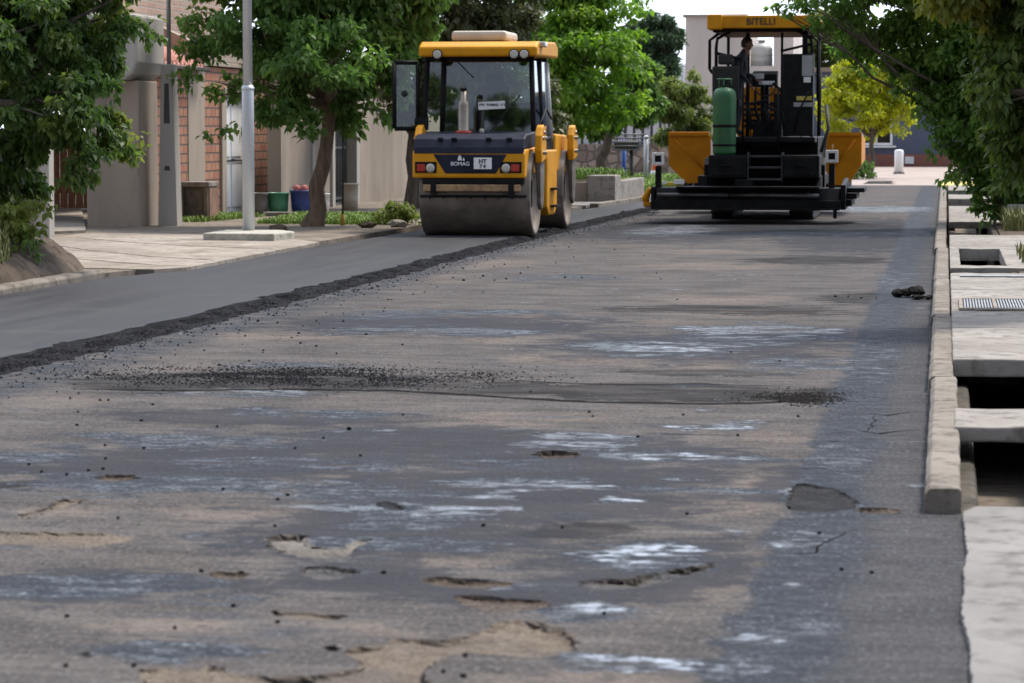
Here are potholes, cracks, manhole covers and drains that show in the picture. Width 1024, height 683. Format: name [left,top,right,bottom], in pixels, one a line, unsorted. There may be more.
pothole [578,562,716,590]
pothole [17,499,87,519]
pothole [136,620,581,683]
pothole [785,483,861,512]
crack [820,411,918,443]
crack [784,528,891,555]
drain grate [959,298,1024,311]
pothole [452,595,555,613]
pothole [263,534,374,558]
pothole [420,577,514,589]
pothole [530,450,582,458]
